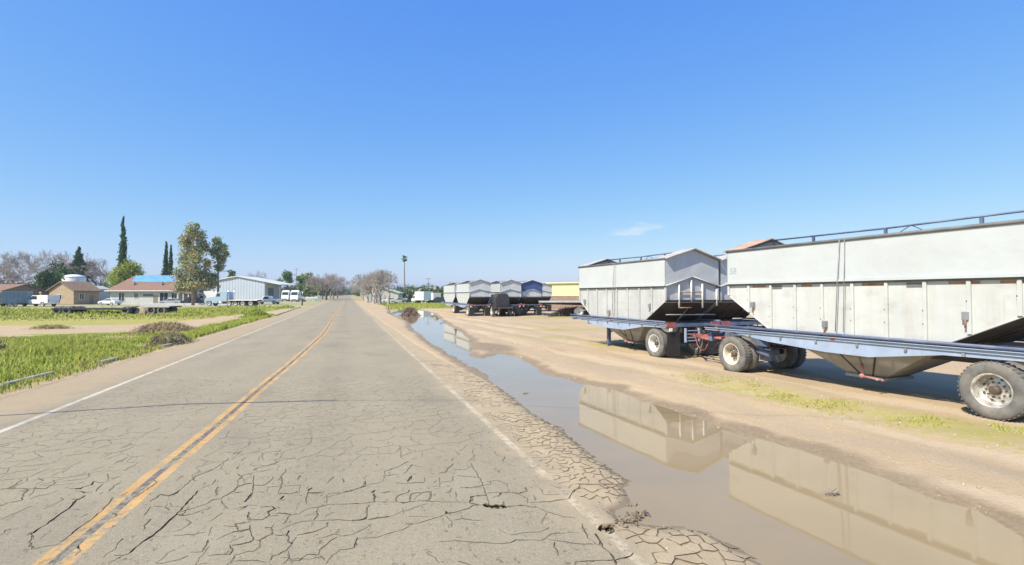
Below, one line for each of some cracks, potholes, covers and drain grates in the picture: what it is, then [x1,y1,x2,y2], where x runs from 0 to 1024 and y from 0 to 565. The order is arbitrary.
crack [0,360,755,565]
